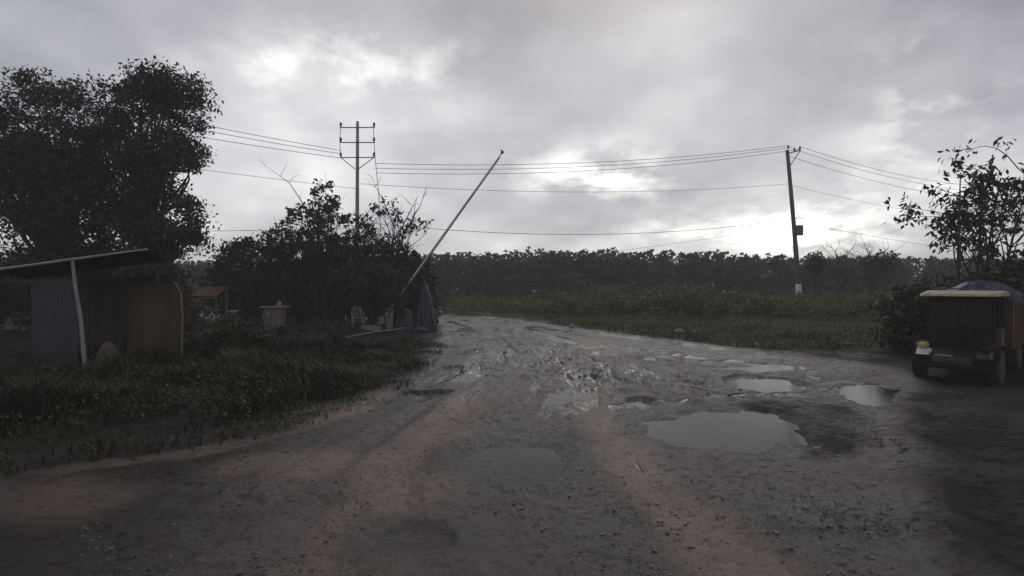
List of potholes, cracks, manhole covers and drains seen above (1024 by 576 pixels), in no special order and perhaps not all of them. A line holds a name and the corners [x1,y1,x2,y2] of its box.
pothole [623,394,661,409]
pothole [720,373,816,393]
pothole [428,365,465,380]
pothole [436,436,588,481]
pothole [383,389,455,406]
pothole [364,514,461,553]
pothole [455,347,483,357]
